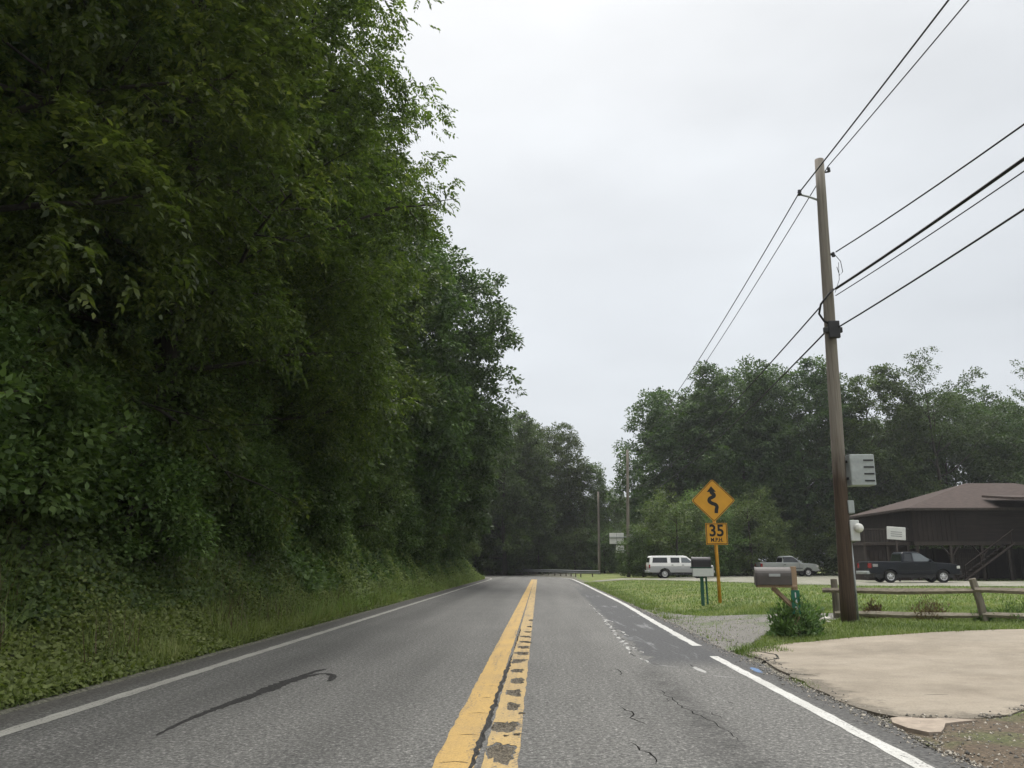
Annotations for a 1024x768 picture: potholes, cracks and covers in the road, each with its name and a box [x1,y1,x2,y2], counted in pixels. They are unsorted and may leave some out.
crack [653,687,738,740]
